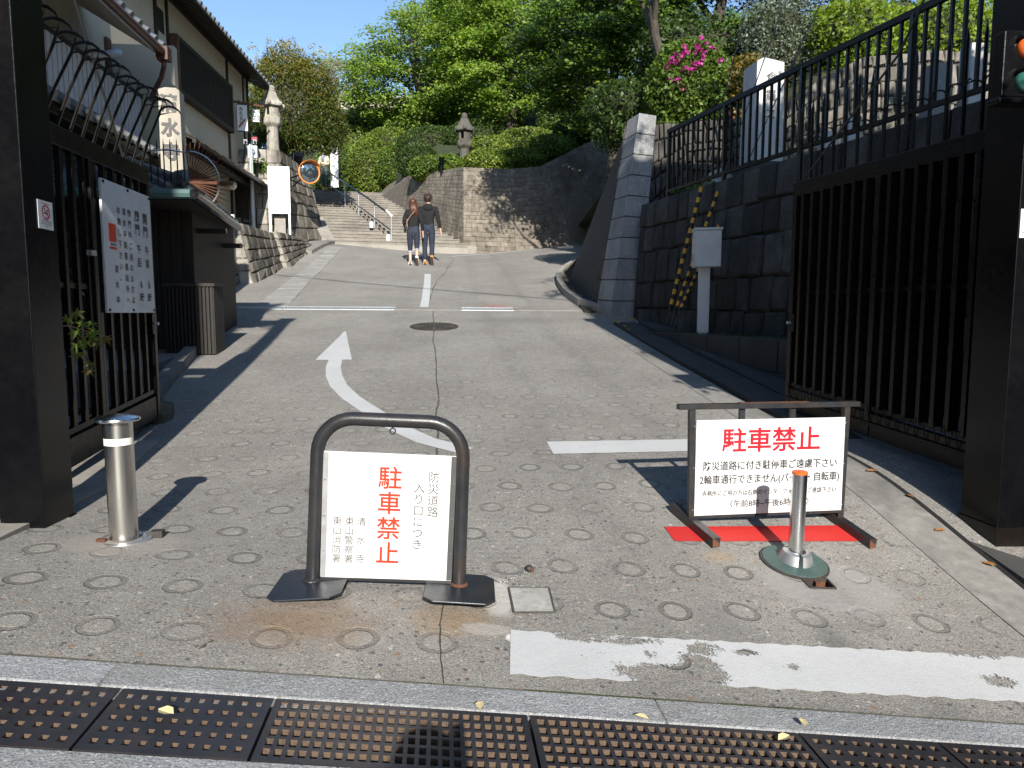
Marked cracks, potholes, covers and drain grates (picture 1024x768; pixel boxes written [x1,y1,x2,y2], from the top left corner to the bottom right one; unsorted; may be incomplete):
drain grate [800,733,966,768]
drain grate [72,688,273,762]
drain grate [530,715,827,768]
drain grate [250,698,538,768]
drain grate [939,742,1024,768]
manhole cover [508,587,556,614]
crack [430,263,451,684]
drain grate [0,680,120,751]
manhole cover [410,322,459,331]
